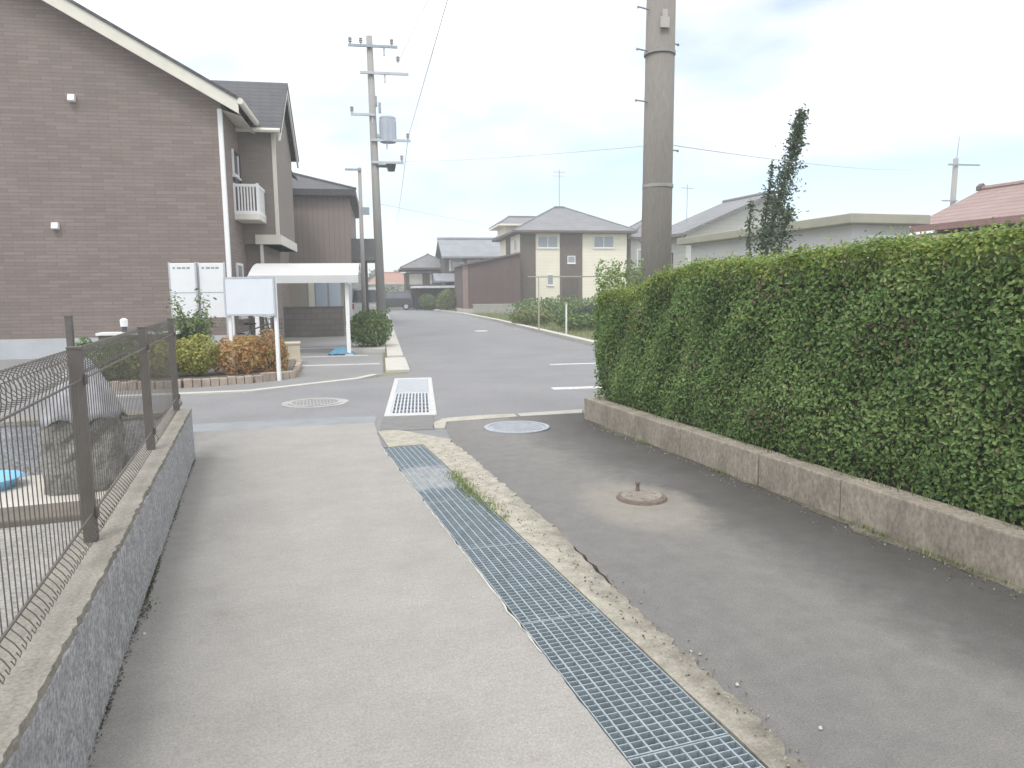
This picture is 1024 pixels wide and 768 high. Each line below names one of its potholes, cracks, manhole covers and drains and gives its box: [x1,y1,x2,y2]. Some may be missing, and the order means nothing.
manhole cover [281,398,349,408]
manhole cover [616,481,668,506]
drain grate [522,611,729,760]
drain grate [627,734,765,768]
manhole cover [484,421,549,434]
drain grate [427,498,525,550]
drain grate [463,542,599,627]
drain grate [401,467,478,504]
drain grate [384,377,437,416]
drain grate [384,445,446,471]
